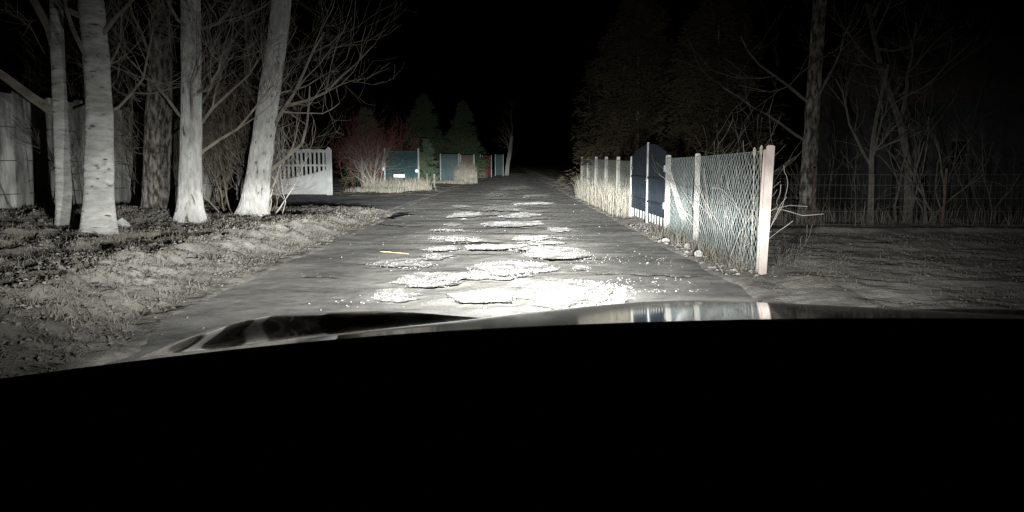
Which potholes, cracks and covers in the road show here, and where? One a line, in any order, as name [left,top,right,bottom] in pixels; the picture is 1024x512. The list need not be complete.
pothole [464,243,529,251]
pothole [435,270,532,283]
pothole [507,278,636,310]
pothole [447,288,515,304]
pothole [446,211,482,220]
pothole [386,271,463,289]
pothole [515,245,591,261]
pothole [467,260,559,277]
pothole [366,258,437,269]
pothole [429,234,482,243]
pothole [368,288,422,303]
